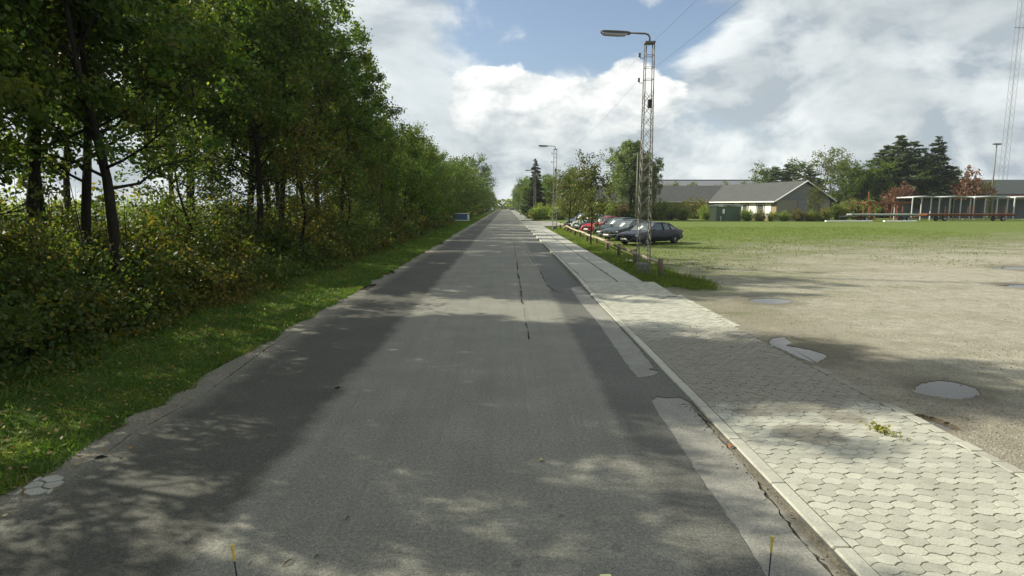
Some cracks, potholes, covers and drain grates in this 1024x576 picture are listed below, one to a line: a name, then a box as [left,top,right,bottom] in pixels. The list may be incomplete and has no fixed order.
pothole [914,380,981,399]
pothole [769,337,828,363]
